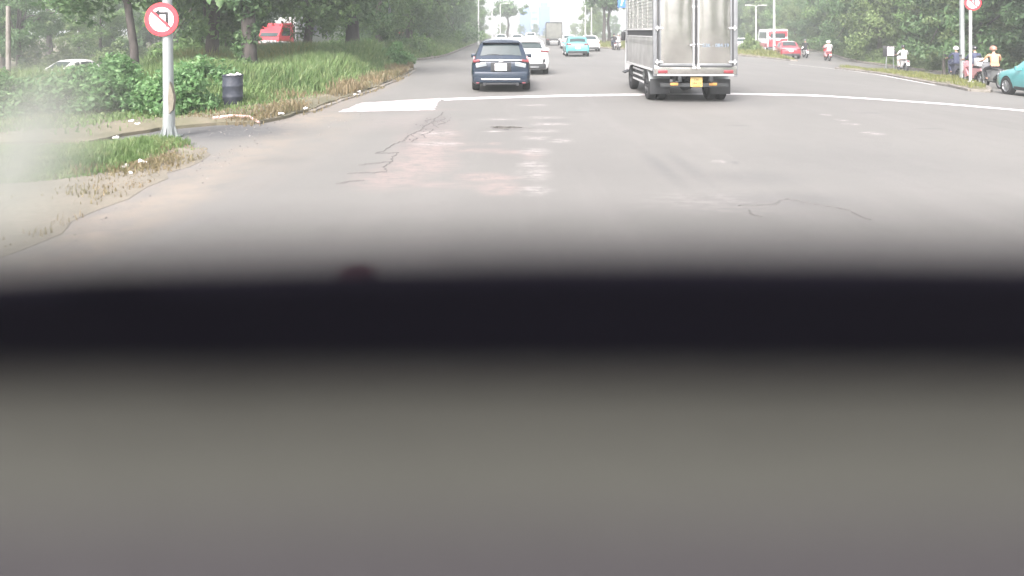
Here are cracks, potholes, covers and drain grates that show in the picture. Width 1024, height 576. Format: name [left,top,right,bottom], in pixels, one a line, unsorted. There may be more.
crack [336,112,447,184]
crack [738,198,871,220]
